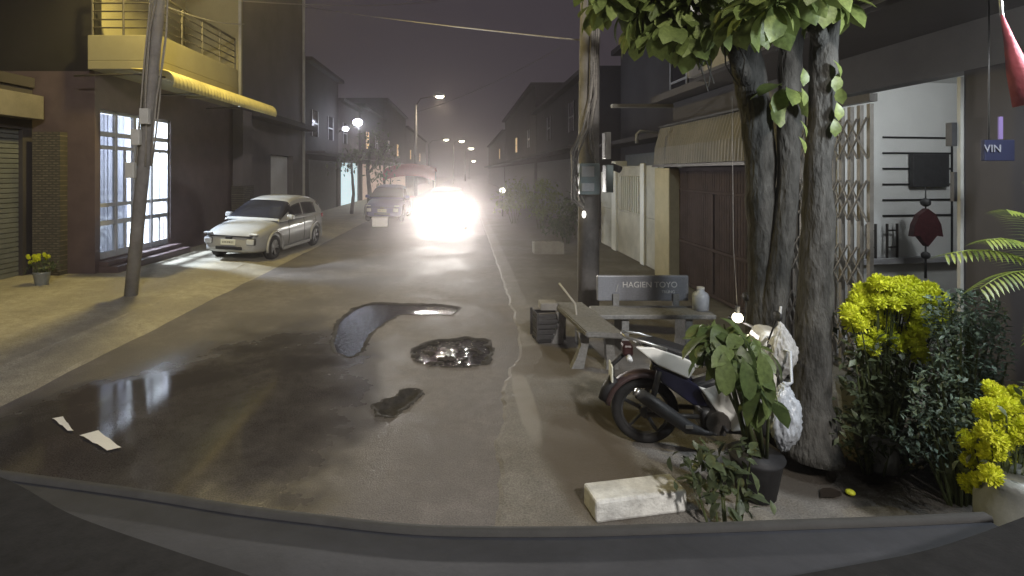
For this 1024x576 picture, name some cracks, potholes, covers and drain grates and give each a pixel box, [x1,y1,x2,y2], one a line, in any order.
pothole [410,336,495,368]
pothole [329,302,461,358]
pothole [370,388,425,419]
